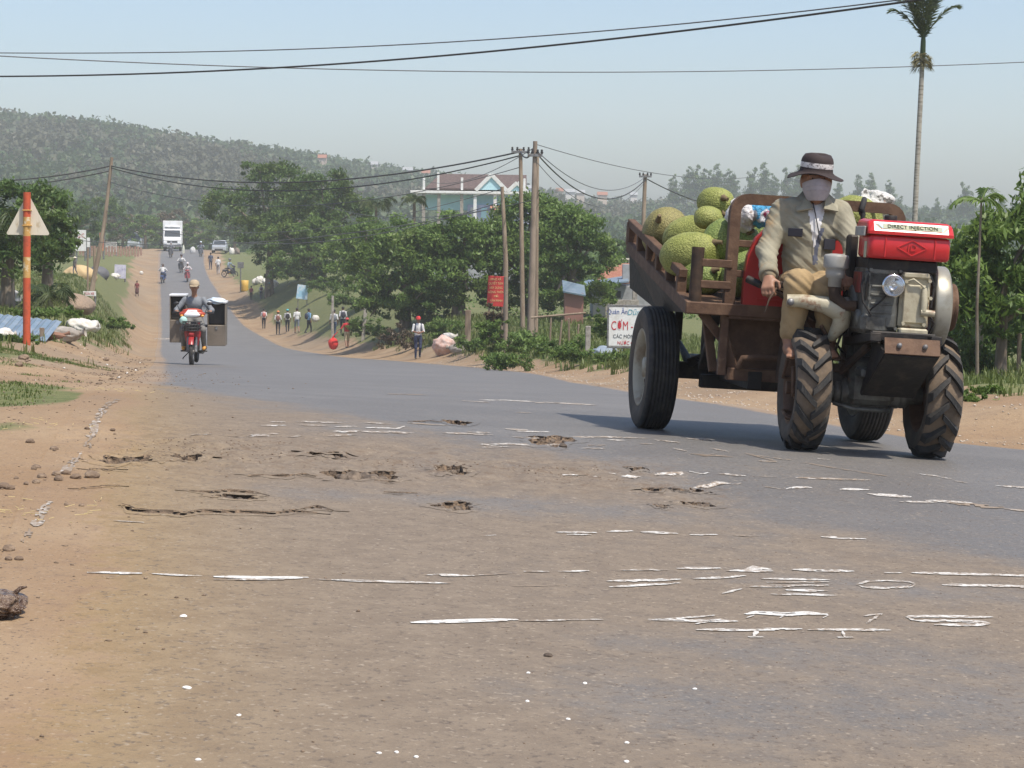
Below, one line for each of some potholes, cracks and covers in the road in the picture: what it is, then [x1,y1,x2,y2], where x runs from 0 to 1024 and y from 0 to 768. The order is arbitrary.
pothole [513,434,590,450]
pothole [294,450,353,460]
pothole [425,462,479,476]
pothole [200,492,268,501]
pothole [85,451,181,470]
pothole [149,452,217,464]
pothole [432,418,481,427]
pothole [419,499,482,513]
pothole [299,465,418,481]
